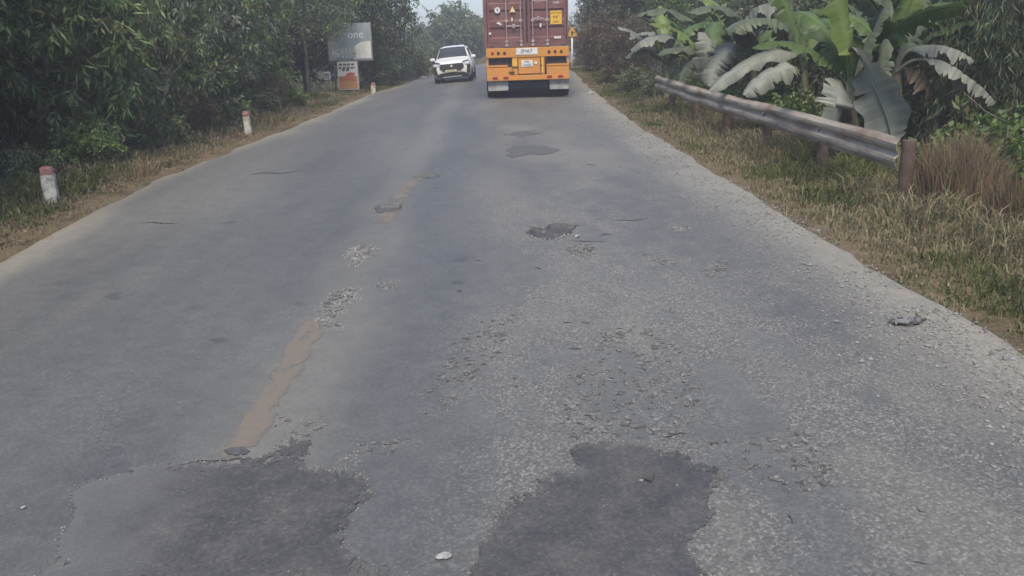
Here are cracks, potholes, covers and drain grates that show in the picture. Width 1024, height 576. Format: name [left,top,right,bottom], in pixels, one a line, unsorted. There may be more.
pothole [525,222,582,240]
pothole [372,203,403,214]
